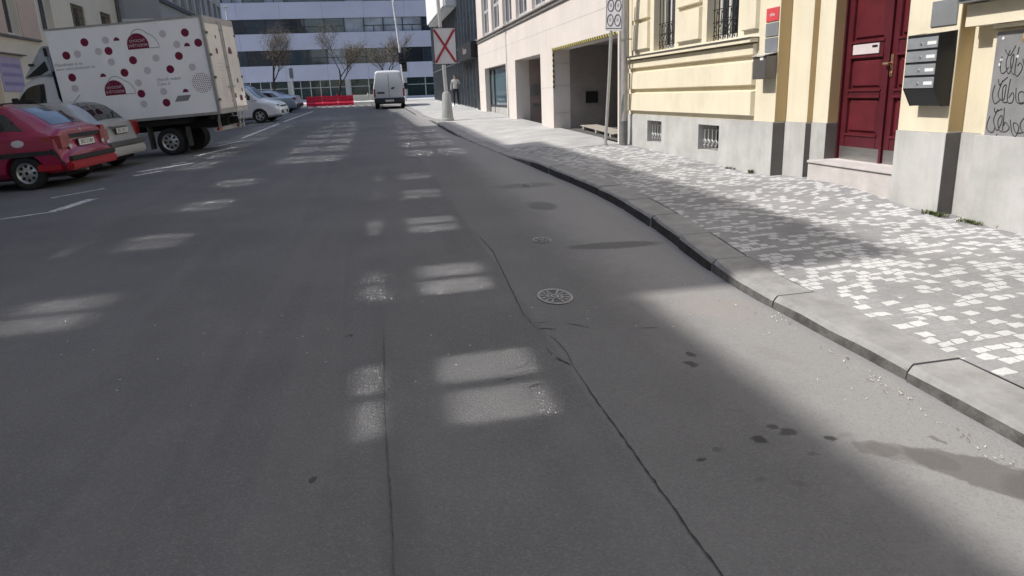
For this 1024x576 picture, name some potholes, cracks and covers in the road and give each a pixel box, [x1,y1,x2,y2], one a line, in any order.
manhole cover [537,289,573,304]
